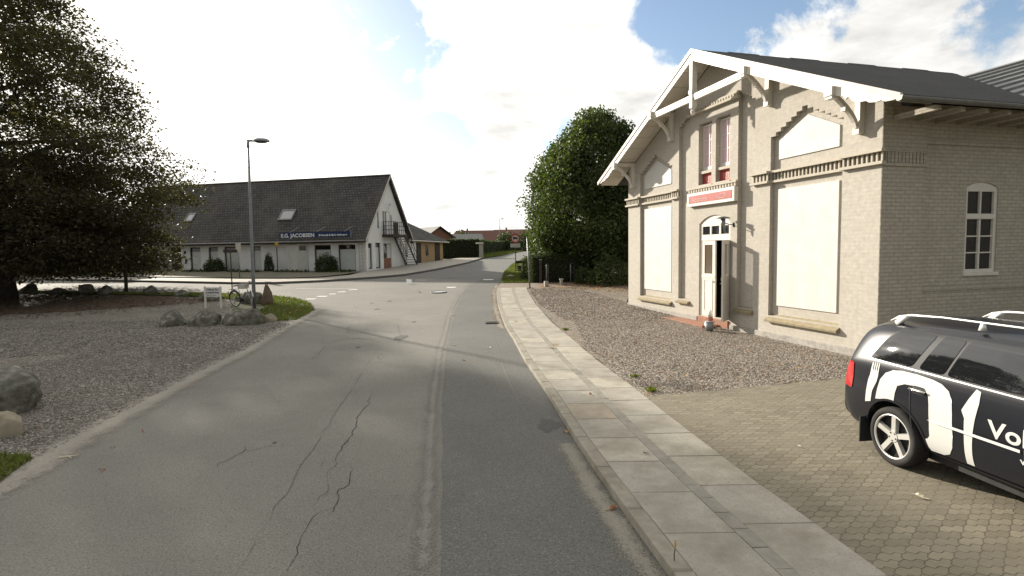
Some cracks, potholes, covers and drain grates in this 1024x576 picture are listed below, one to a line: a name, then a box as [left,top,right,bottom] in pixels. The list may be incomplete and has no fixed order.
crack [236,348,379,572]
